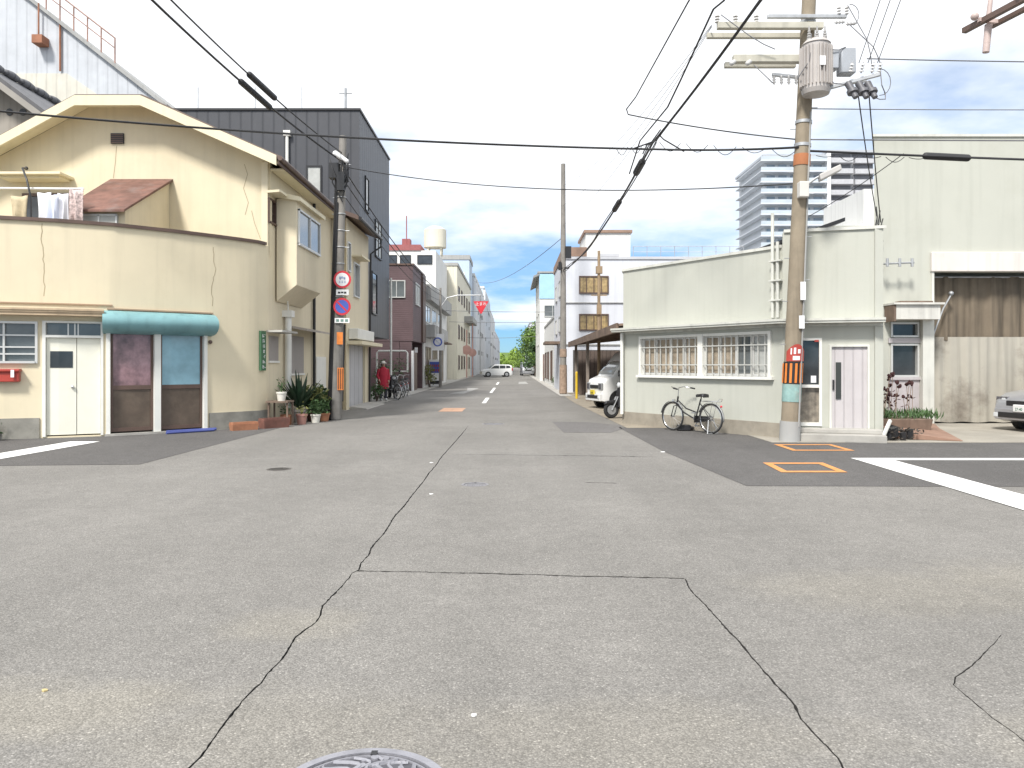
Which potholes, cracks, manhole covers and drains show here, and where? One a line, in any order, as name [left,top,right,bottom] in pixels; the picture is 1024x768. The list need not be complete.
crack [953,635,1024,742]
manhole cover [297,748,441,768]
